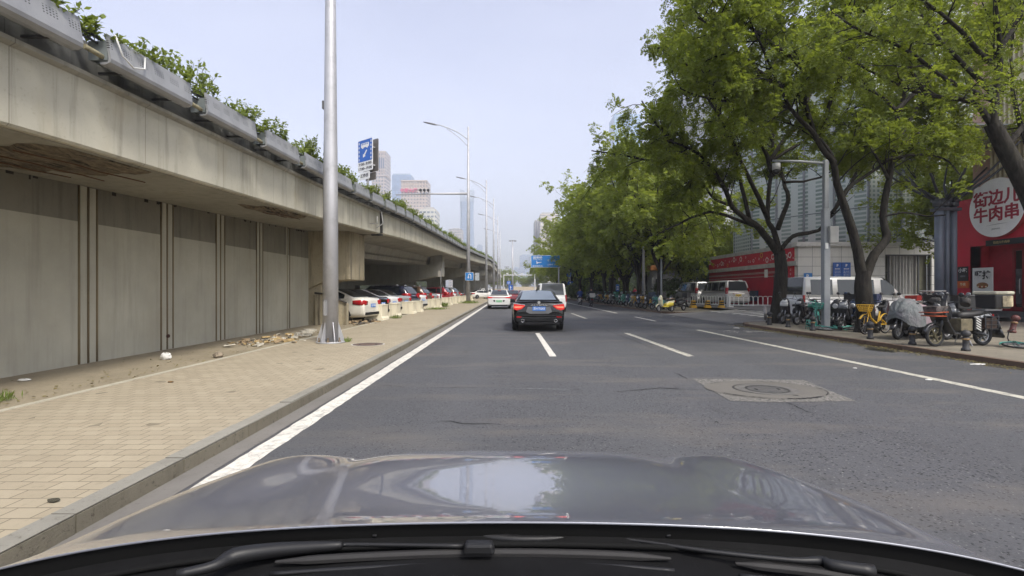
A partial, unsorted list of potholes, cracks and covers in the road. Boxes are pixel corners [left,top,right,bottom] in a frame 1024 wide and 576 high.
crack [616,372,829,413]
manhole cover [736,384,800,395]
